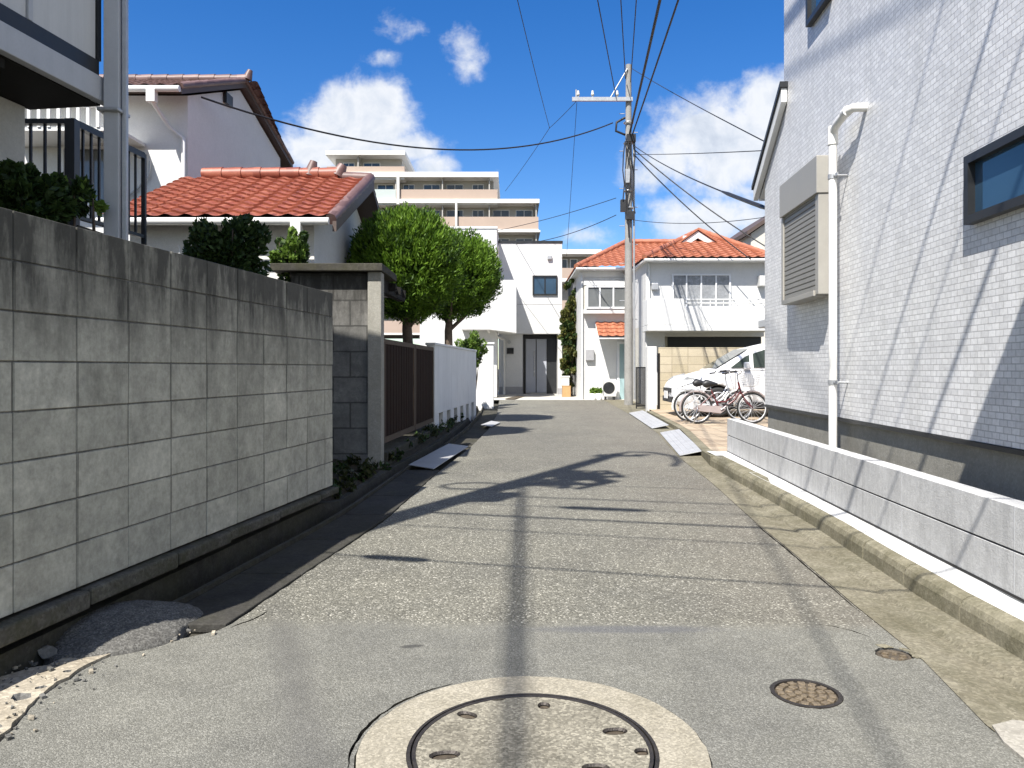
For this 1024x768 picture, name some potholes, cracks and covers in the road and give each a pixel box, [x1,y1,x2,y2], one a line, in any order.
manhole cover [875,644,921,661]
crack [756,524,869,637]
manhole cover [356,676,711,768]
pothole [11,693,31,701]
manhole cover [770,679,843,709]
